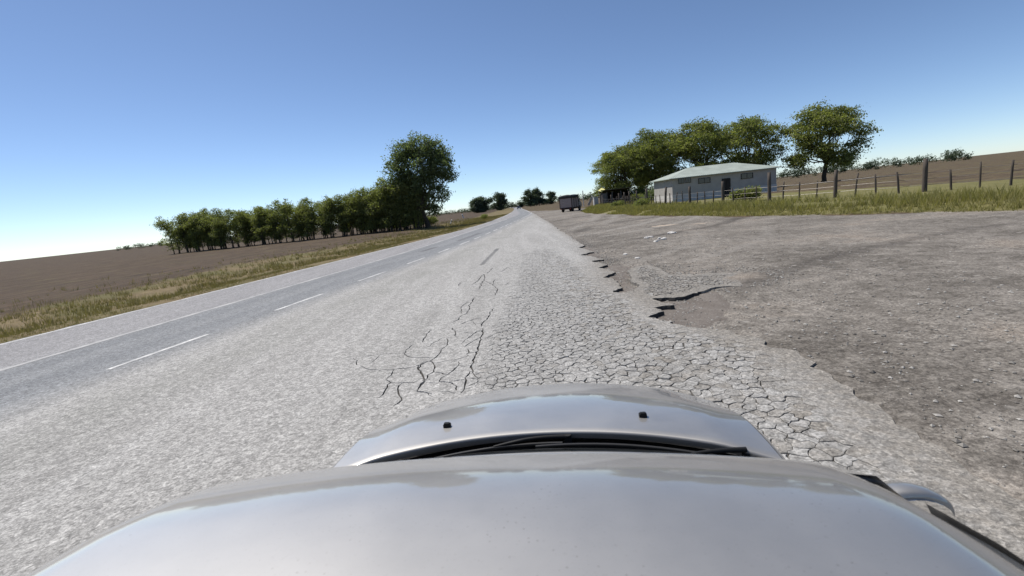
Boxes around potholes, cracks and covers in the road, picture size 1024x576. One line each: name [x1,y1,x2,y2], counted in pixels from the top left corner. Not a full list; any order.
crack [485,260,853,470]
crack [383,276,498,404]
pothole [649,292,732,328]
